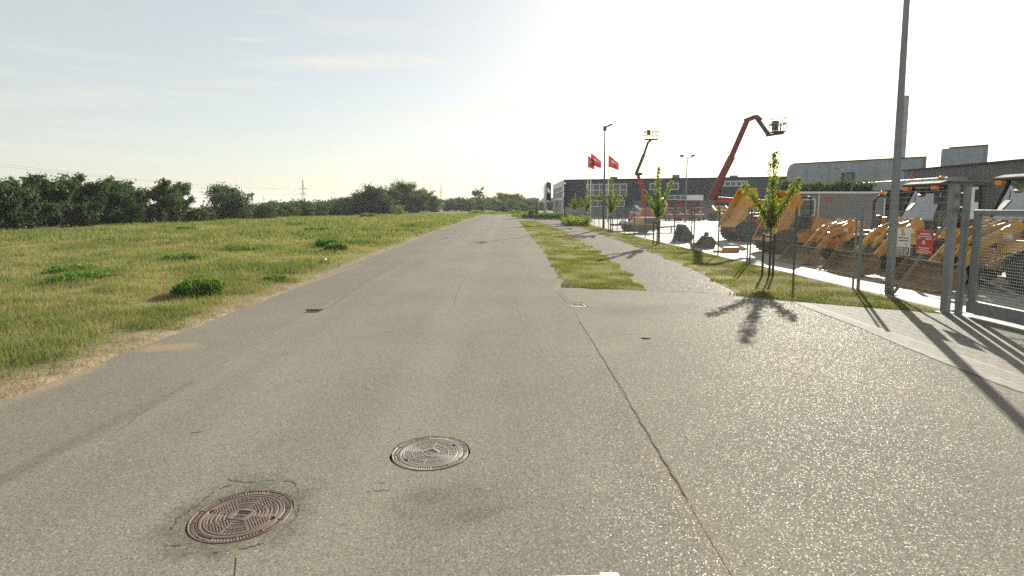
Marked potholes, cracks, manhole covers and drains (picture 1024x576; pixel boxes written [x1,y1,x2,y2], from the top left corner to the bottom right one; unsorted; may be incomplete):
crack [163,478,300,554]
manhole cover [186,490,294,544]
manhole cover [390,437,470,471]
